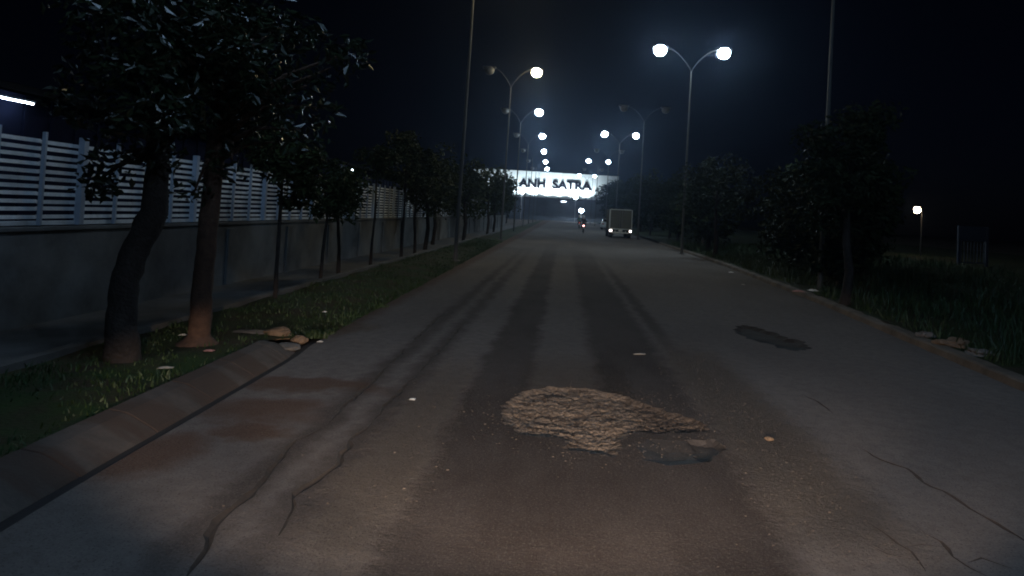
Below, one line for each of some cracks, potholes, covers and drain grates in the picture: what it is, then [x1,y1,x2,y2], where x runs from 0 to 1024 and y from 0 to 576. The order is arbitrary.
pothole [500,386,710,457]
crack [853,444,1024,576]
pothole [637,439,727,466]
crack [186,311,465,576]
